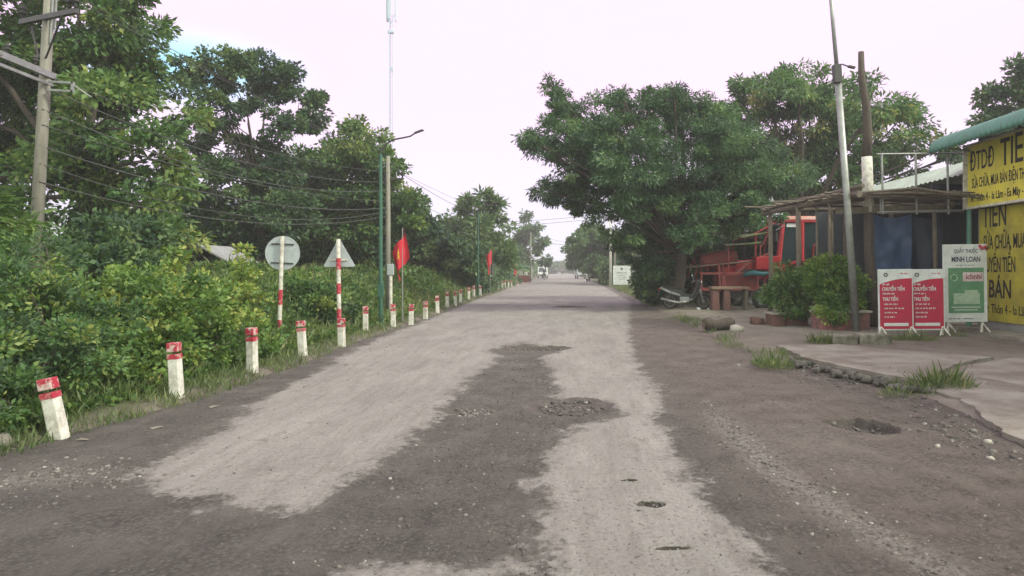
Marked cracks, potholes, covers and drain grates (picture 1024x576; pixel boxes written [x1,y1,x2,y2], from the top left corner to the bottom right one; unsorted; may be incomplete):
pothole [509,395,627,420]
pothole [628,499,672,510]
pothole [809,414,916,439]
pothole [639,544,708,553]
pothole [484,343,587,352]
